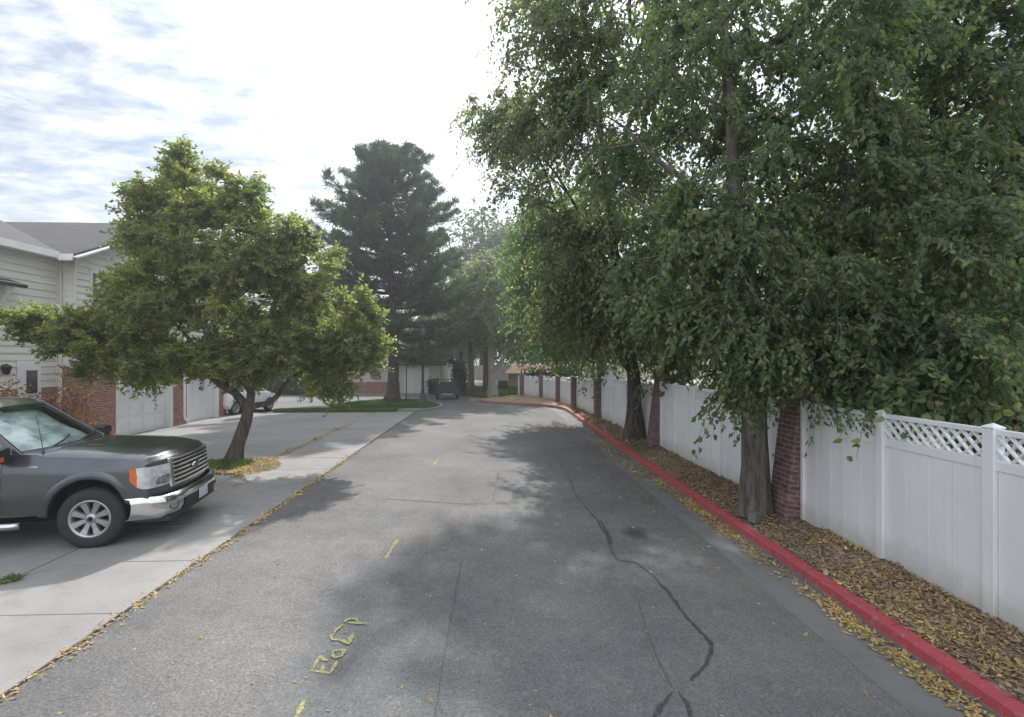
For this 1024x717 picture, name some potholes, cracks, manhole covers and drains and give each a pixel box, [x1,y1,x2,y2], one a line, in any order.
crack [635,594,693,717]
crack [553,453,592,513]
